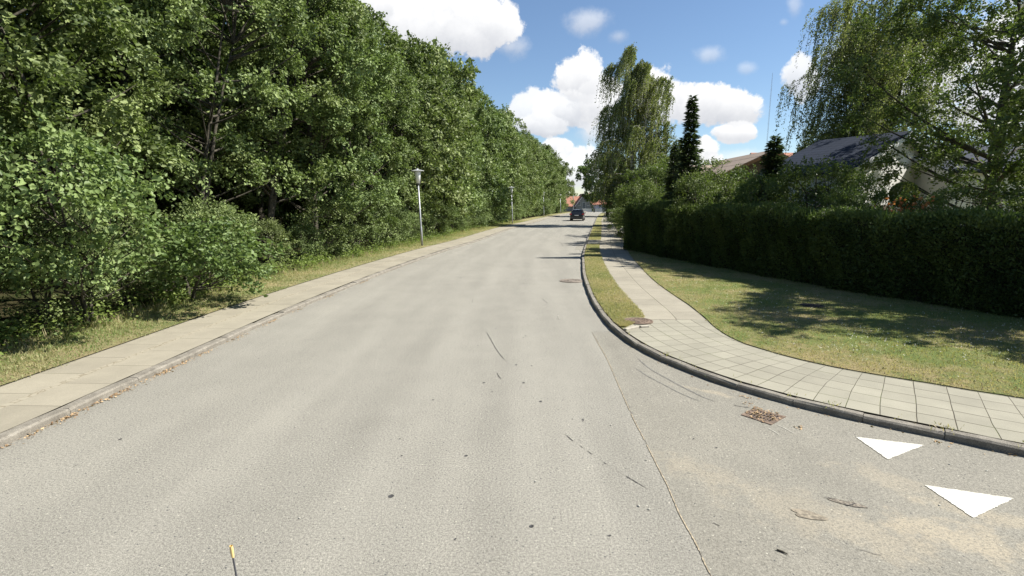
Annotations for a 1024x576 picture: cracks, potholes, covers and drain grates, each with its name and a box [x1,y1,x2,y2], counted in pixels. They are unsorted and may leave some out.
manhole cover [625,317,653,325]
drain grate [741,408,786,425]
